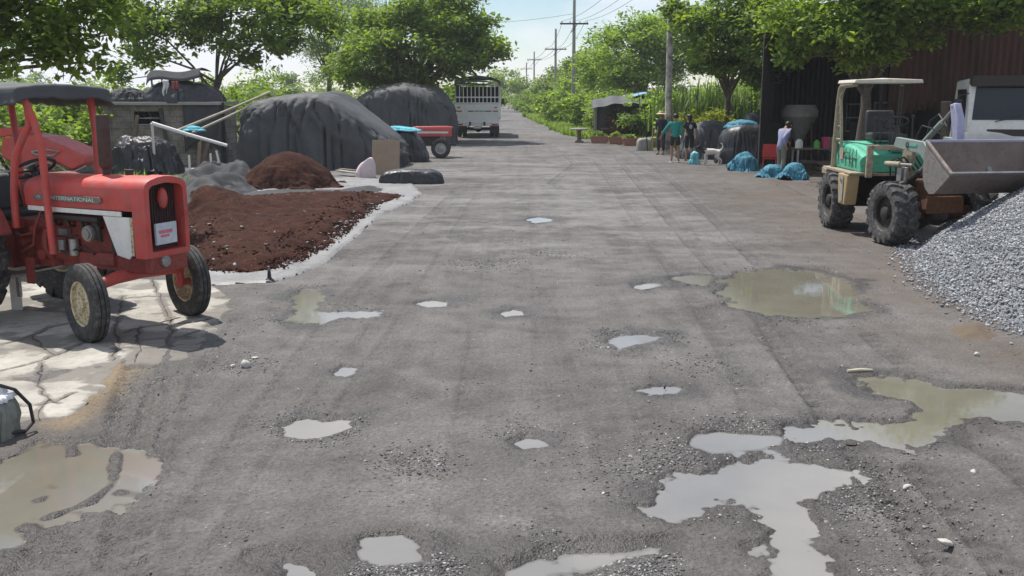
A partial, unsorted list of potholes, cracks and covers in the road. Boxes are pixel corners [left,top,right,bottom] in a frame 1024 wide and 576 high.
pothole [472,530,692,576]
pothole [626,280,675,291]
pothole [625,380,692,398]
pothole [497,428,568,452]
pothole [409,297,460,308]
pothole [271,413,364,441]
pothole [321,361,376,380]
pothole [489,307,537,319]
pothole [0,434,186,563]
pothole [270,286,393,327]
pothole [622,448,879,576]
